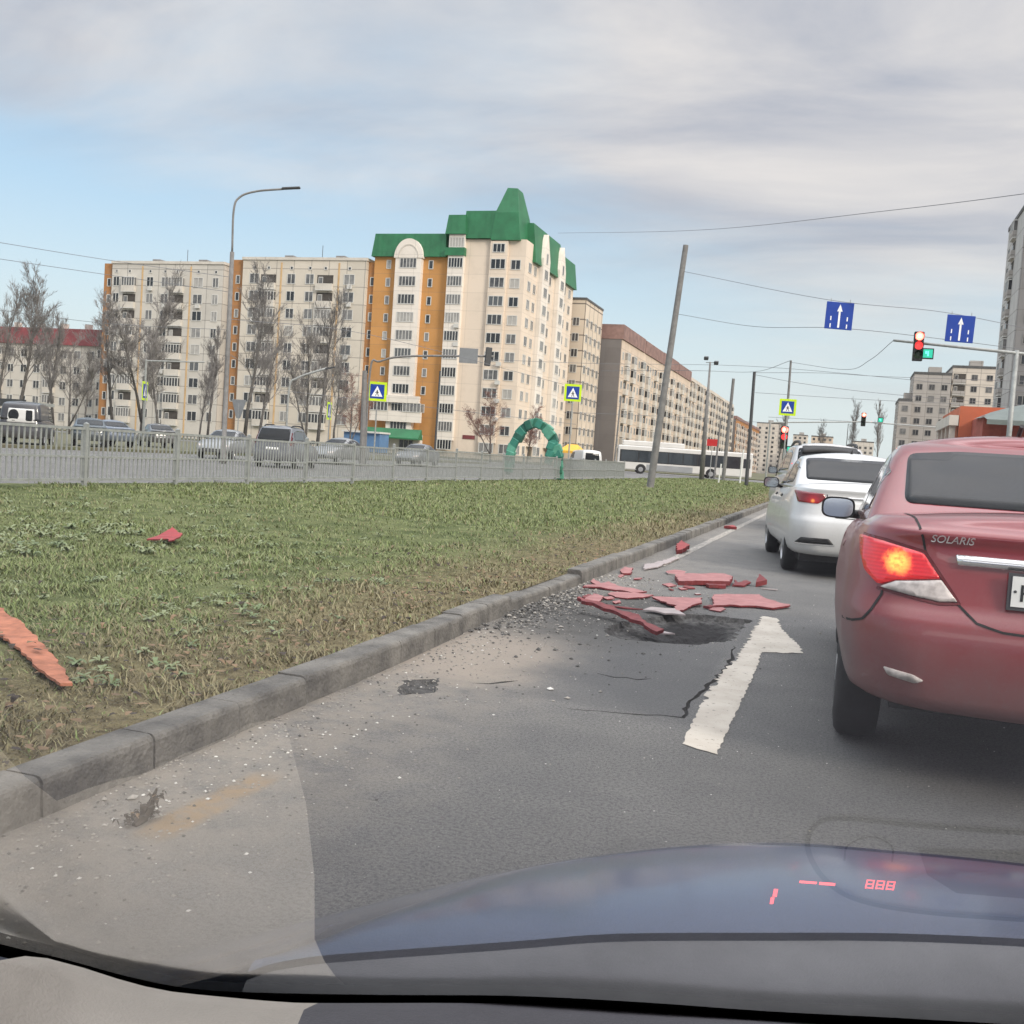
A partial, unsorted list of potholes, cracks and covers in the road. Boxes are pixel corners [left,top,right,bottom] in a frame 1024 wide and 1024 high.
crack [574,647,735,718]
pothole [604,613,753,645]
